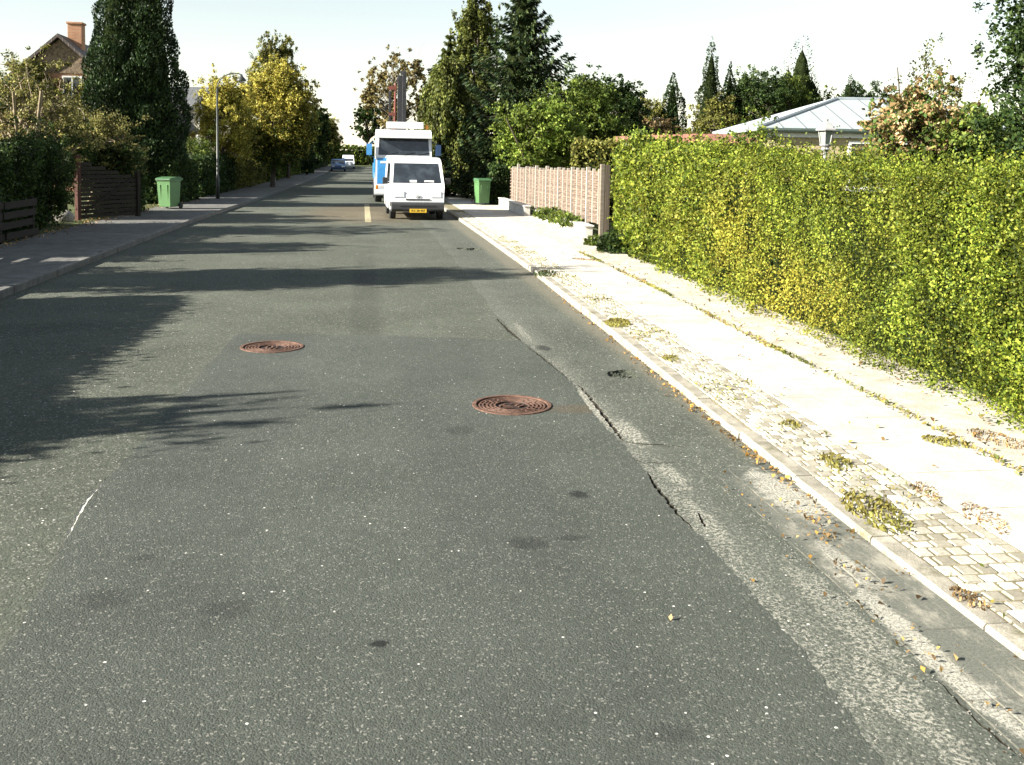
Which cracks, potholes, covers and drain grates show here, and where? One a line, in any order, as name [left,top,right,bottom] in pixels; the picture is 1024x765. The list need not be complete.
manhole cover [472,395,552,415]
crack [497,319,706,528]
pothole [606,370,639,379]
manhole cover [240,340,304,353]
